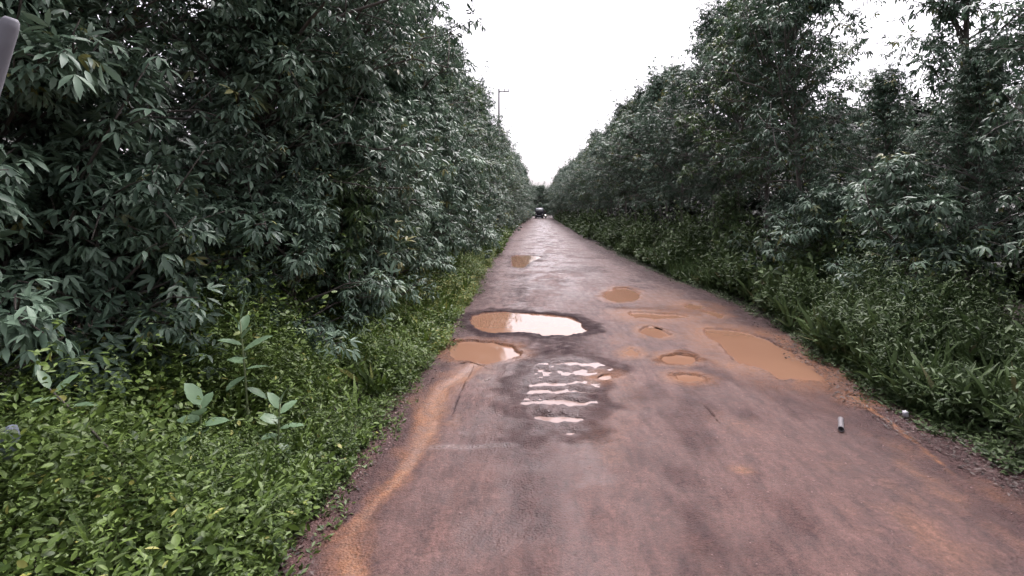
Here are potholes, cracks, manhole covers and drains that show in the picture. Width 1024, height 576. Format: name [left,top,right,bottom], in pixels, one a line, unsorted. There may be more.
pothole [647,349,714,369]
crack [688,398,740,434]
pothole [610,344,652,361]
pothole [492,350,634,455]
pothole [589,285,654,305]
pothole [504,254,549,269]
pothole [625,322,684,341]
pothole [612,309,703,322]
pothole [455,308,607,340]
pothole [687,324,855,388]
pothole [671,301,718,311]
pothole [431,335,540,370]
